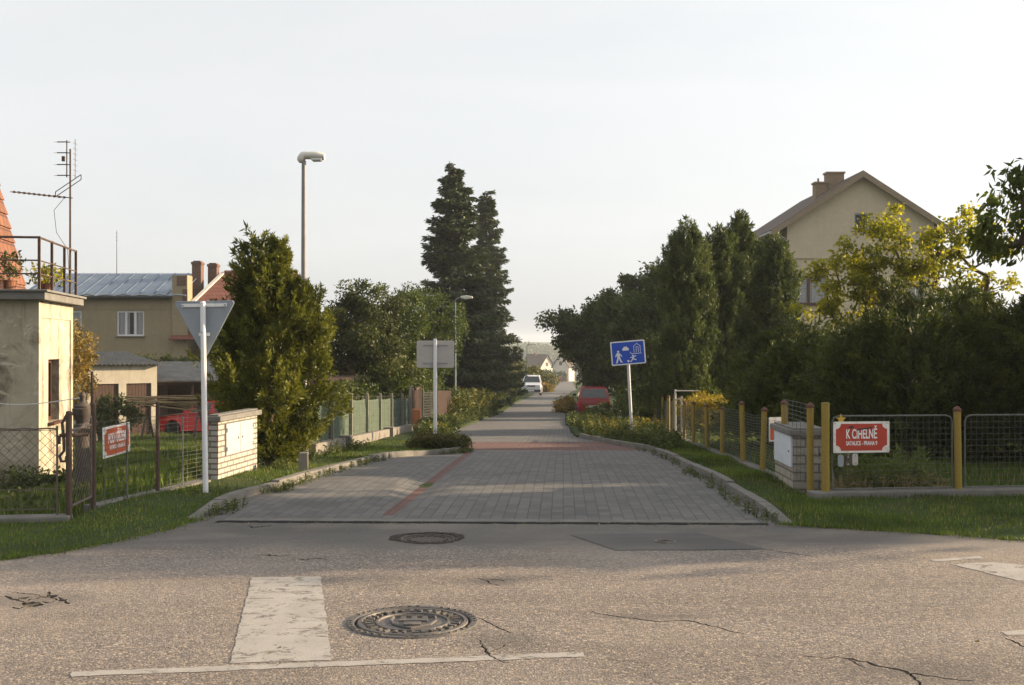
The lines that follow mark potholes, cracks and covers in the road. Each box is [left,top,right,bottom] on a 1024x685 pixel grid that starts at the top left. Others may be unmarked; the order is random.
manhole cover [389,532,465,544]
crack [5,591,70,609]
crack [592,611,743,634]
crack [479,618,516,663]
manhole cover [346,605,479,639]
crack [806,656,973,685]
